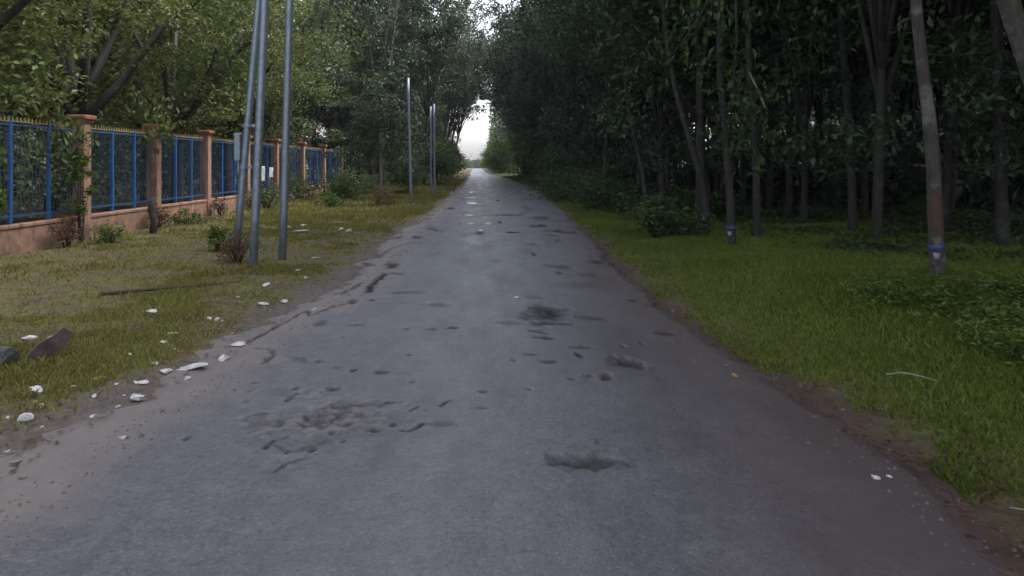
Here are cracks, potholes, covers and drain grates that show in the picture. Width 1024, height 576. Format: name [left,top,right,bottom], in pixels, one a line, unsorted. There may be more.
pothole [598,370,617,381]
pothole [604,354,653,370]
pothole [364,425,385,434]
pothole [517,302,585,321]
pothole [543,448,641,474]
crack [244,239,429,364]
pothole [298,412,313,423]
